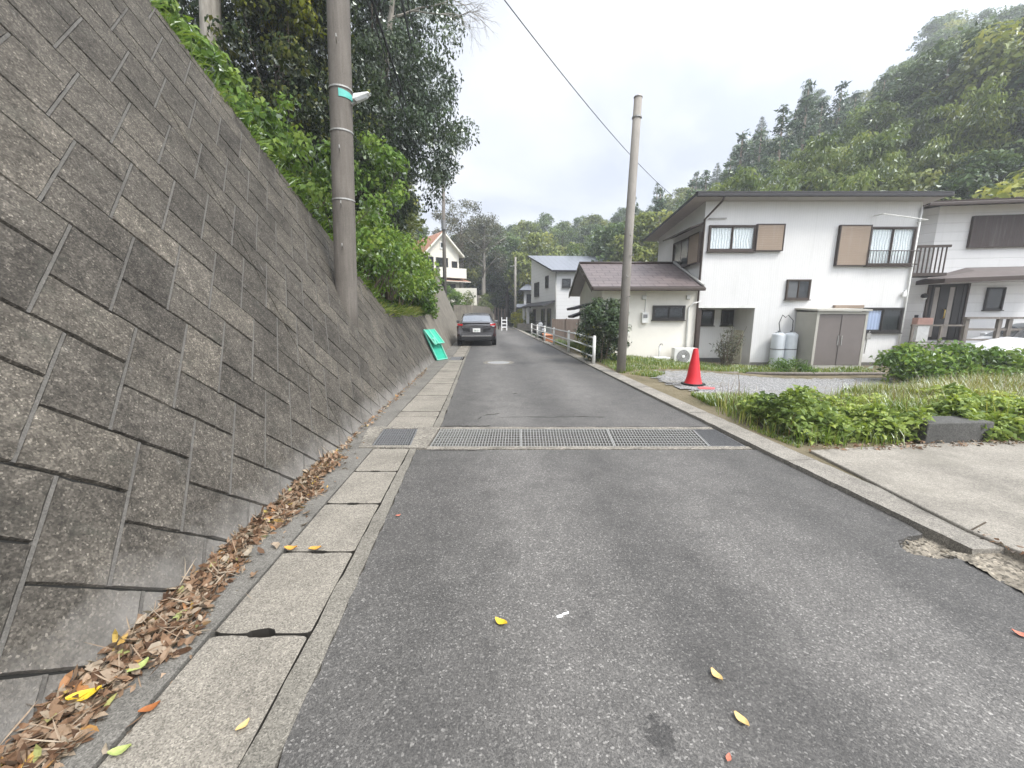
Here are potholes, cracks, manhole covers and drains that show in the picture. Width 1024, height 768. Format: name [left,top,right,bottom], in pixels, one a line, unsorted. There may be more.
drain grate [373,429,418,445]
drain grate [521,429,614,447]
pothole [899,536,958,559]
drain grate [430,429,521,447]
drain grate [607,429,709,447]
